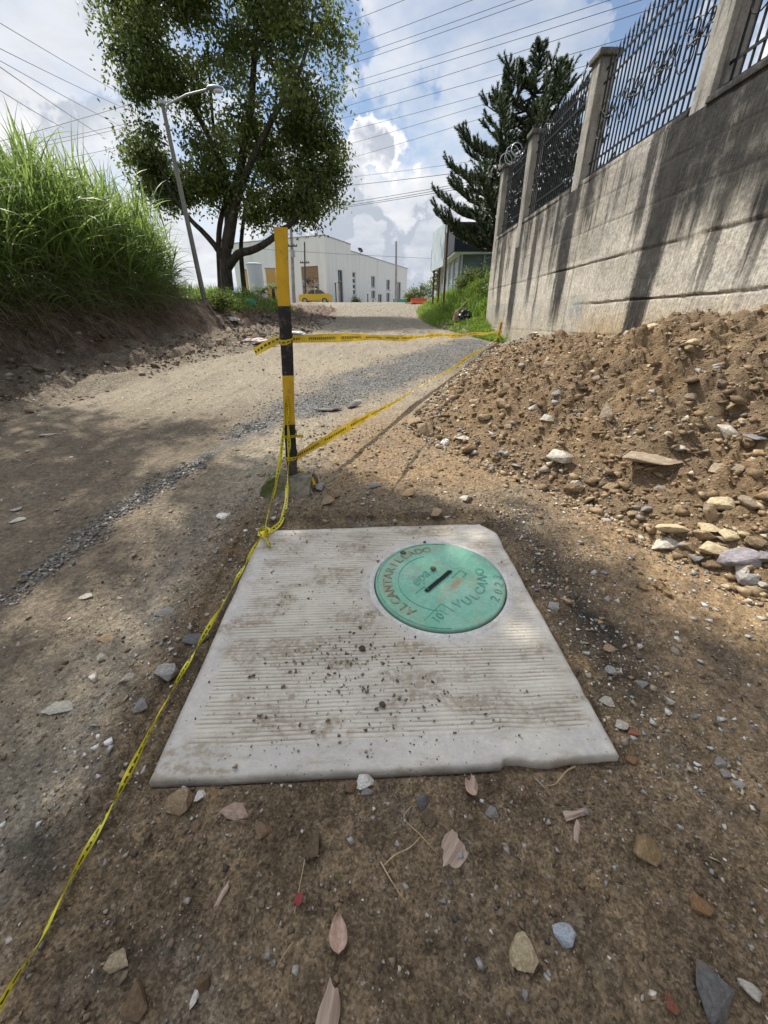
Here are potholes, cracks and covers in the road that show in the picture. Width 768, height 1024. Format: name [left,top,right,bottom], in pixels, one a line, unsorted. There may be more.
manhole cover [375,544,506,634]
